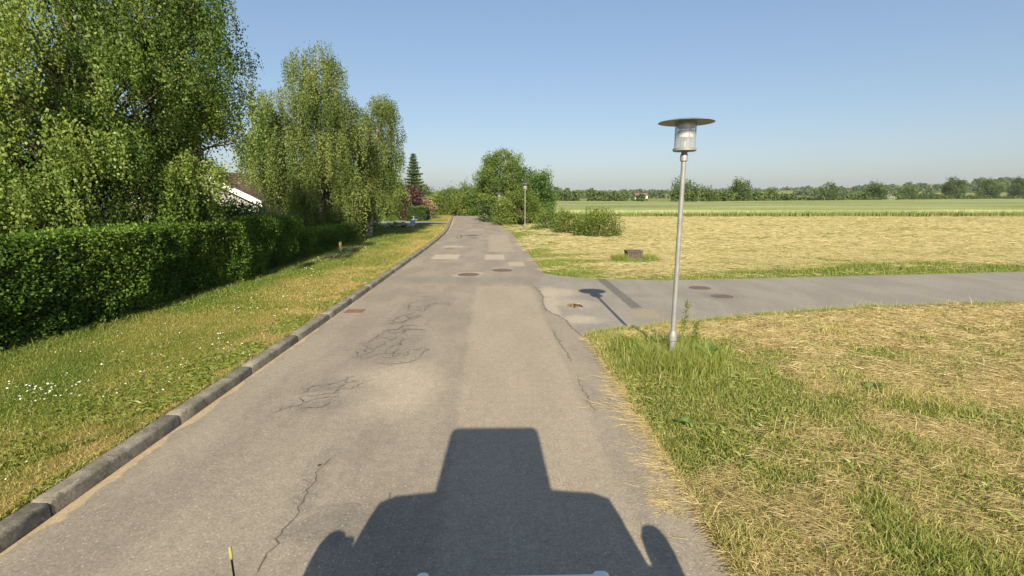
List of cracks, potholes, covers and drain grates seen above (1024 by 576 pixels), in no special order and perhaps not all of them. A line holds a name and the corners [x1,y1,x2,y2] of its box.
crack [256,458,360,575]
crack [267,375,367,417]
crack [349,292,455,366]
